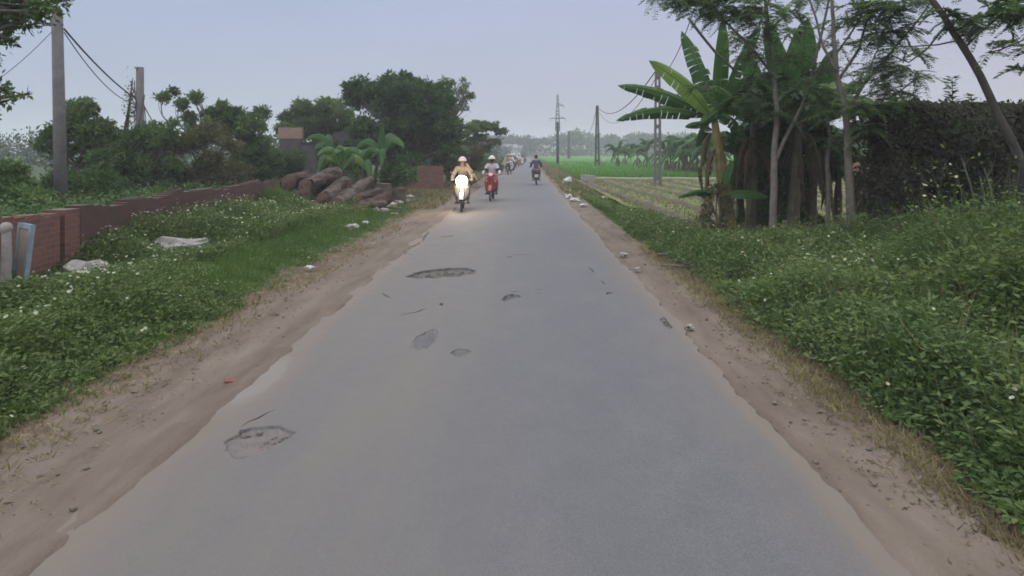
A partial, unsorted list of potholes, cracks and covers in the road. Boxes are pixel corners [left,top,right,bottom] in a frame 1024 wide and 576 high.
pothole [409,328,438,352]
pothole [404,267,478,279]
pothole [450,348,472,358]
pothole [222,425,298,460]
